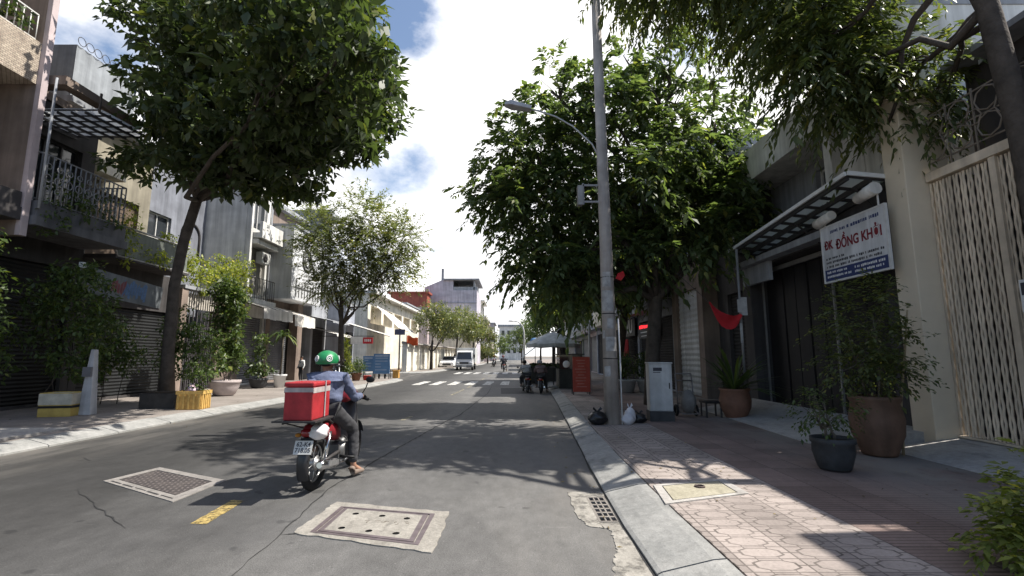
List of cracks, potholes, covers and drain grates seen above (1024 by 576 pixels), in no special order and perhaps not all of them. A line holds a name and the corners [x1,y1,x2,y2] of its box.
manhole cover [294,502,449,554]
manhole cover [103,467,226,502]
manhole cover [653,479,749,506]
drain grate [586,497,619,522]
crack [78,490,124,527]
